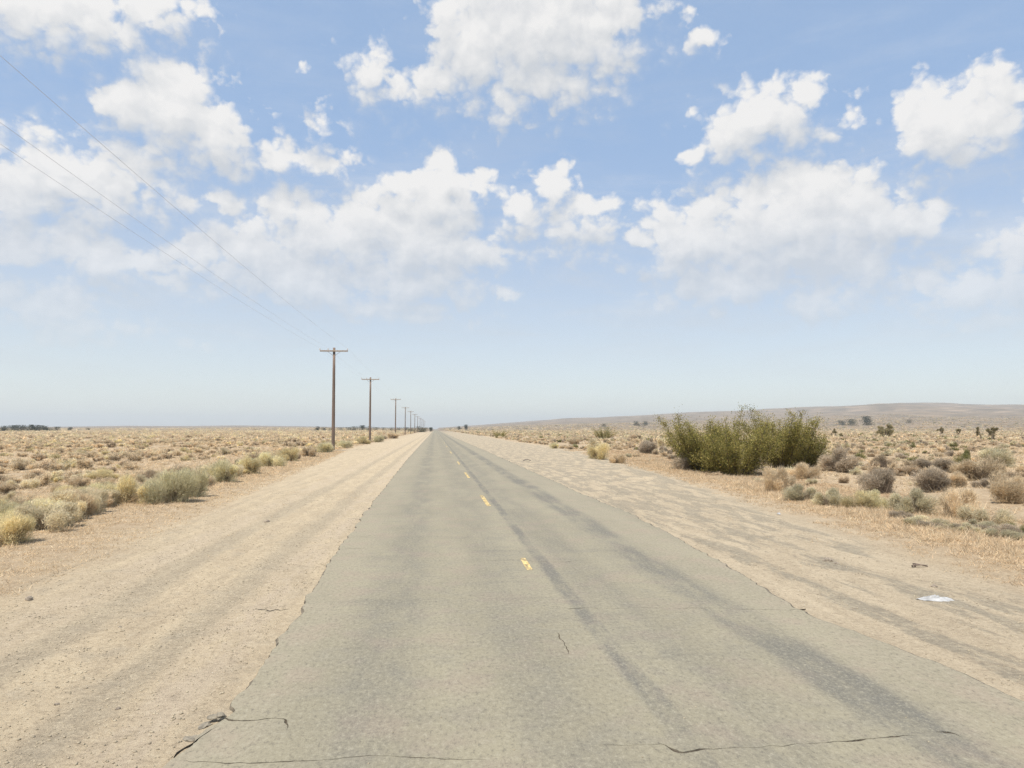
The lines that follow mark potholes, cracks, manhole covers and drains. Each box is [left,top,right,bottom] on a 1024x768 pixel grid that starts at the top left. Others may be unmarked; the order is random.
crack [173,718,471,764]
crack [618,735,908,753]
